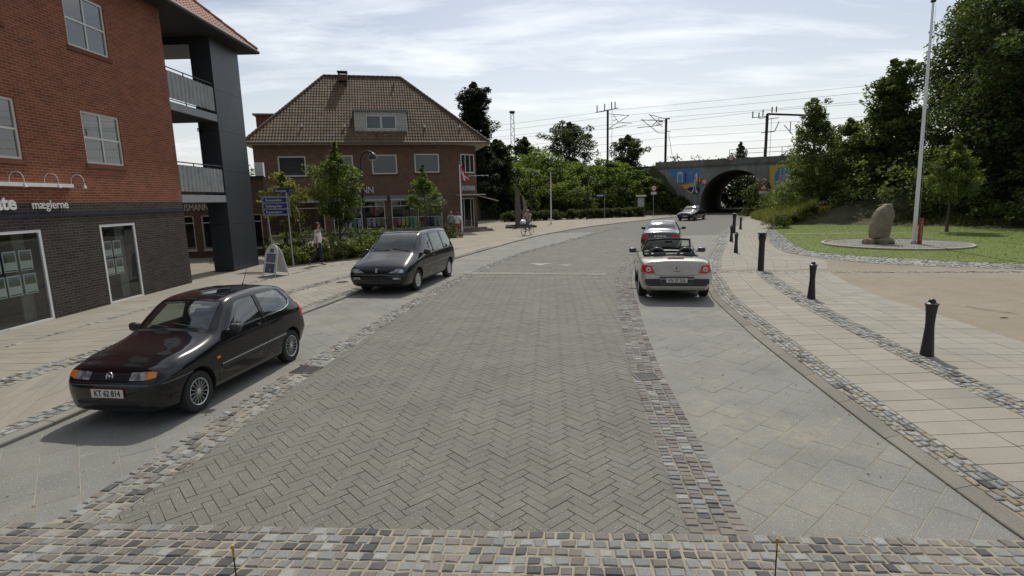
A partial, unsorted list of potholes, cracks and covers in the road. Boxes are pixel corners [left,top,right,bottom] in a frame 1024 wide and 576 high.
drain grate [289,366,323,374]
drain grate [632,372,661,381]
